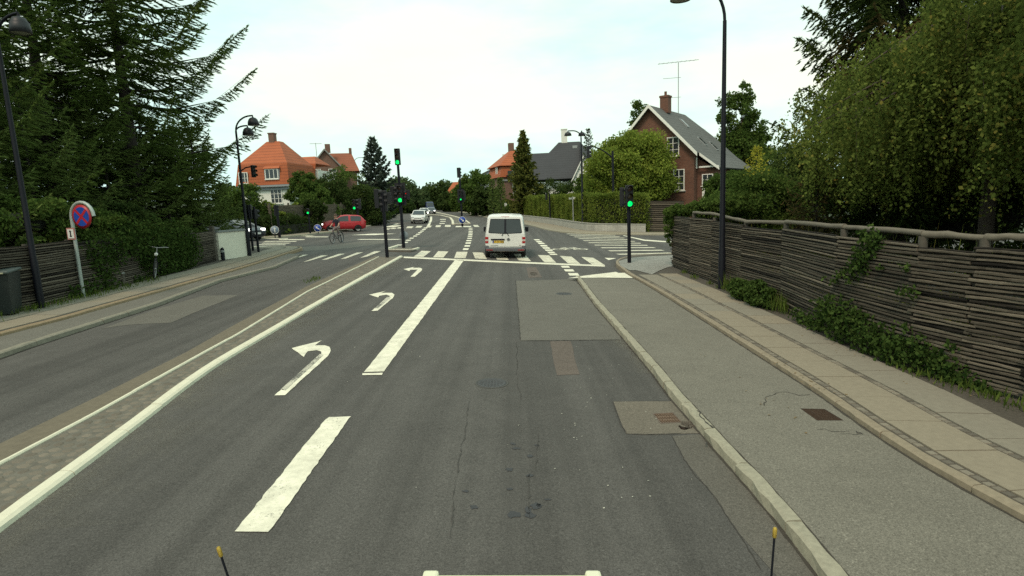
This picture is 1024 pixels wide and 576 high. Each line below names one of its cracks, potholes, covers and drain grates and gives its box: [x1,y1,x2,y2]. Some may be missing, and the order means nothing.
manhole cover [475,378,508,388]
drain grate [800,408,844,421]
crack [450,403,469,538]
drain grate [652,412,681,424]
